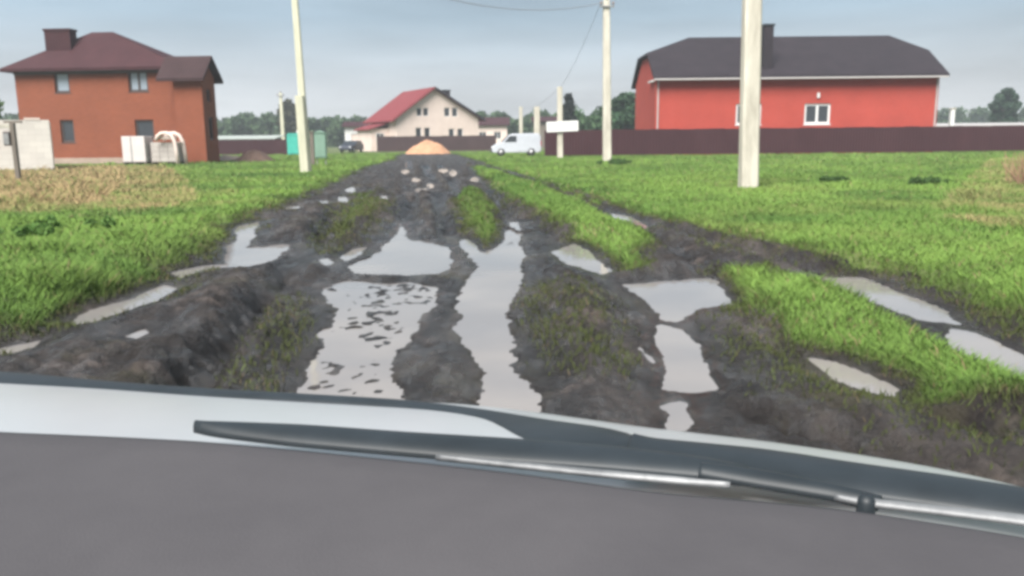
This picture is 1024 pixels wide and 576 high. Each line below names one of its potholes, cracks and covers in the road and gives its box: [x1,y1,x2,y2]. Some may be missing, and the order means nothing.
pothole [504,221,525,231]
pothole [616,274,740,323]
pothole [285,277,446,401]
pothole [216,219,297,267]
pothole [795,350,914,399]
pothole [547,241,620,275]
pothole [342,223,461,276]
pothole [442,226,555,415]
pothole [809,273,972,326]
pothole [333,245,372,261]
pothole [644,321,732,395]
